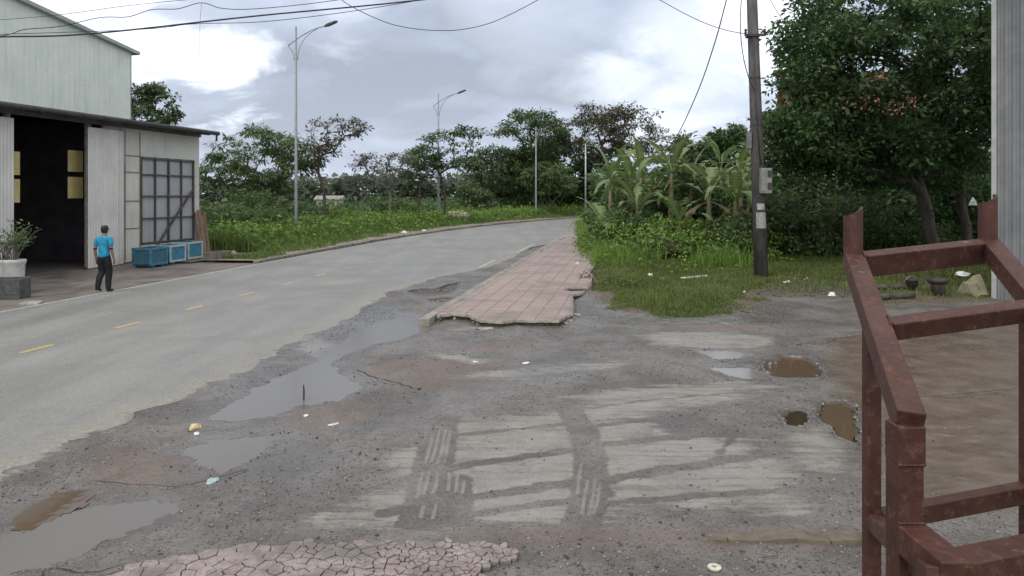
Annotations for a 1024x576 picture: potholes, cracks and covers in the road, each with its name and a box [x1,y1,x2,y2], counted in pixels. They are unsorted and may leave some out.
pothole [778,408,815,428]
crack [91,470,241,490]
pothole [757,354,830,379]
pothole [812,398,862,445]
crack [123,542,519,576]
pothole [404,282,460,295]
crack [353,369,419,390]
